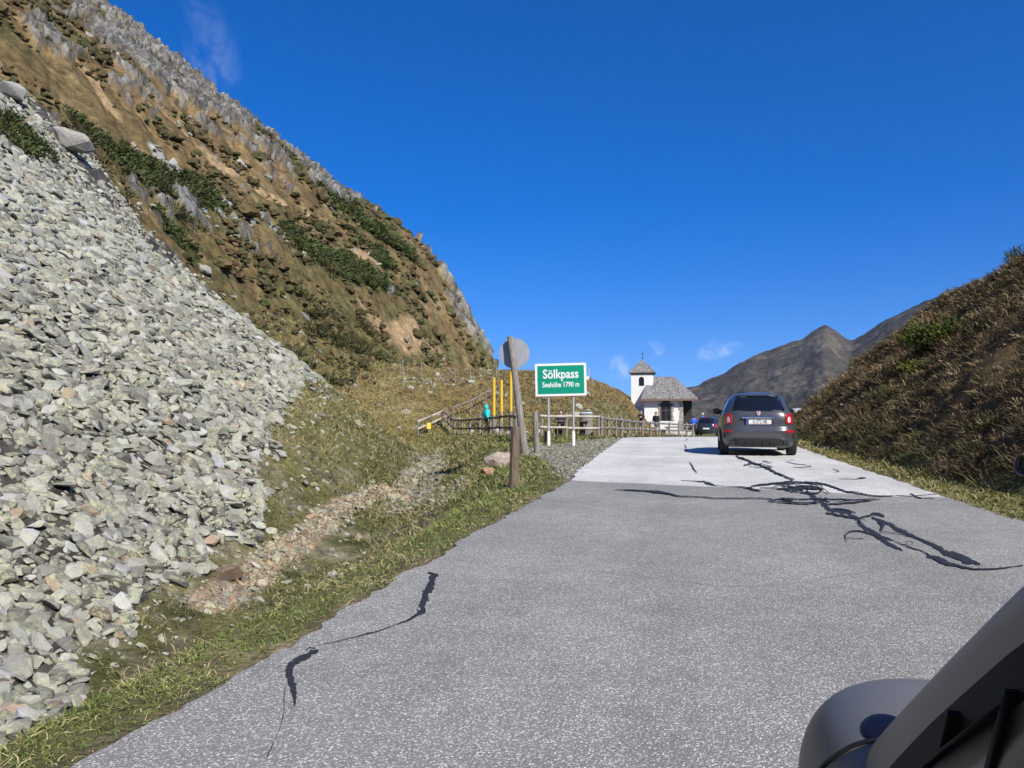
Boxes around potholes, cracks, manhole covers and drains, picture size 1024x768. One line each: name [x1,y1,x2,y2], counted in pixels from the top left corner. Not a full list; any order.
crack [581,455,1023,586]
